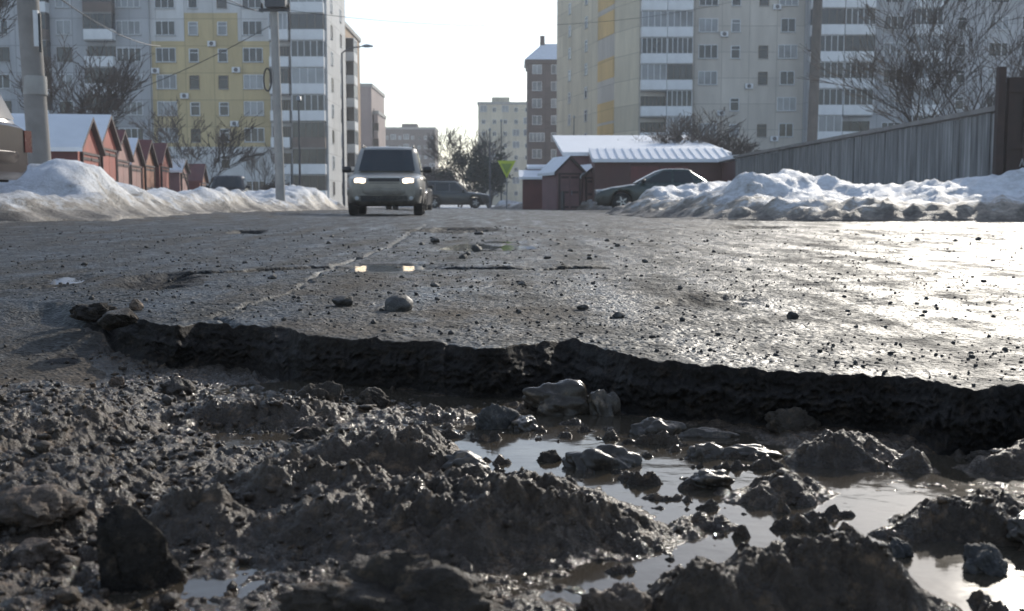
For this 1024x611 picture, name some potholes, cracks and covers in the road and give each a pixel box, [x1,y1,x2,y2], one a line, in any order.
pothole [338,263,442,272]
pothole [0,319,1024,611]
pothole [100,270,208,291]
crack [191,224,610,328]
